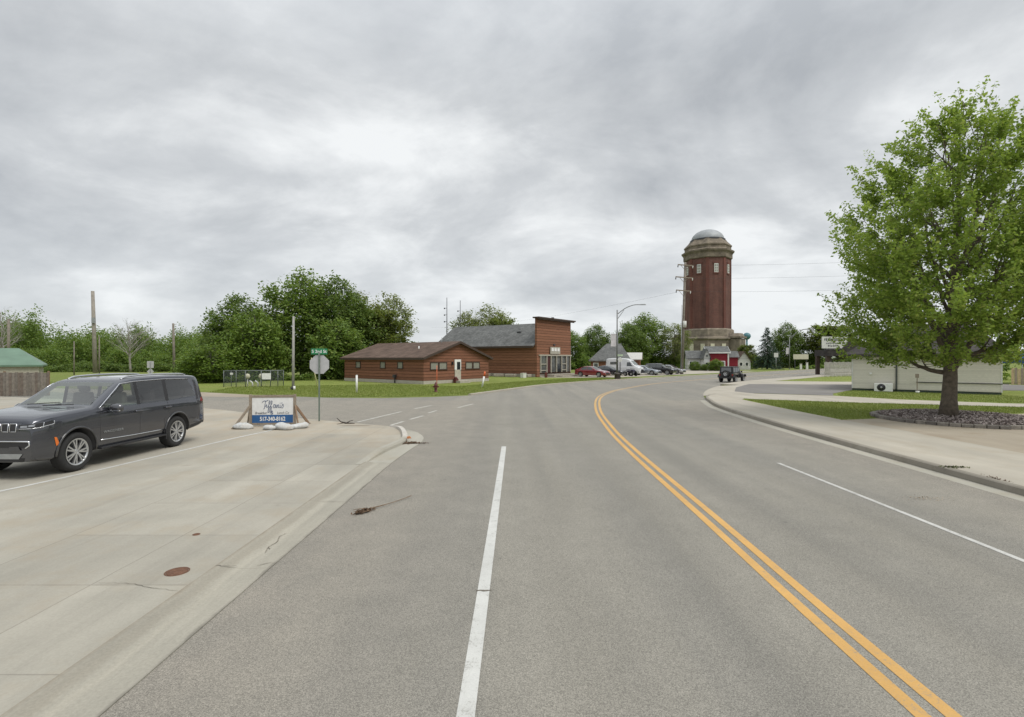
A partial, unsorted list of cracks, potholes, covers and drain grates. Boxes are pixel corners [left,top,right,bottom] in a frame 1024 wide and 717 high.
manhole cover [164,567,190,576]
